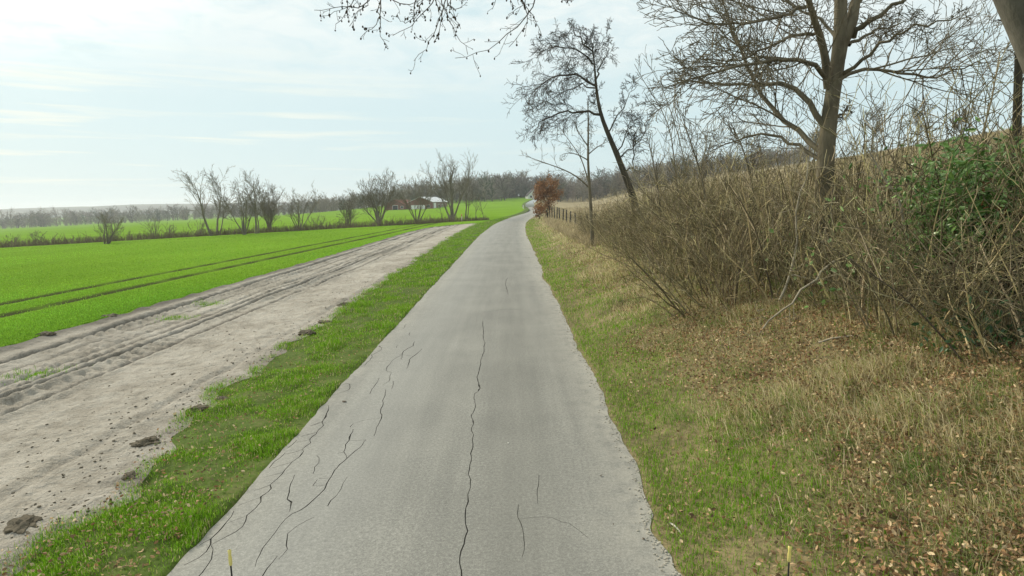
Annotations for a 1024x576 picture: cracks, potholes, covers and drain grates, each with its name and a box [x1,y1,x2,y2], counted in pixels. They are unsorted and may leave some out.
crack [459,309,518,576]
crack [185,327,421,576]
crack [517,481,587,556]
